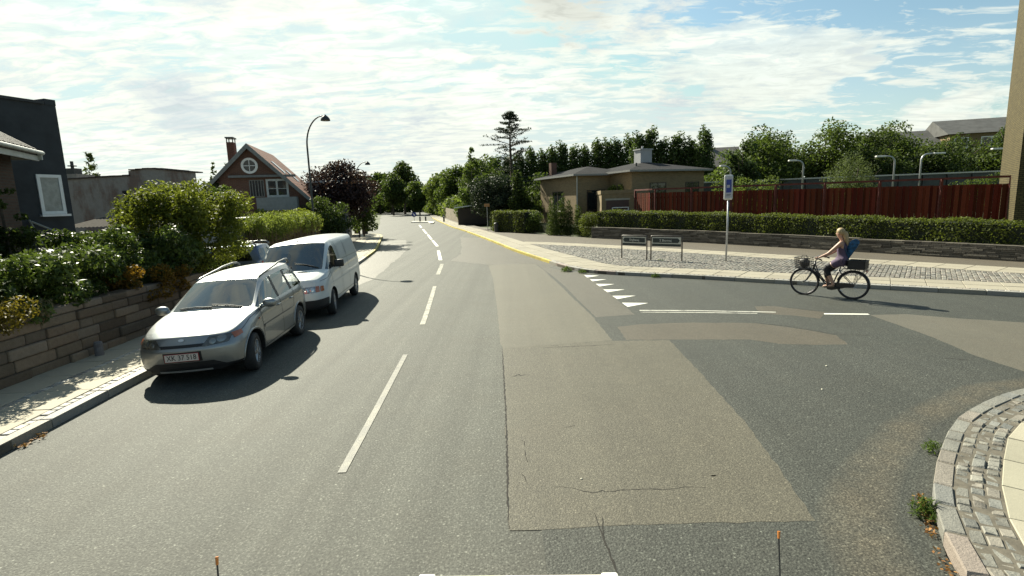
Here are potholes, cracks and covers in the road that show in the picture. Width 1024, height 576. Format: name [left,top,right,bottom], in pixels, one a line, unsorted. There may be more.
crack [594,513,617,573]
